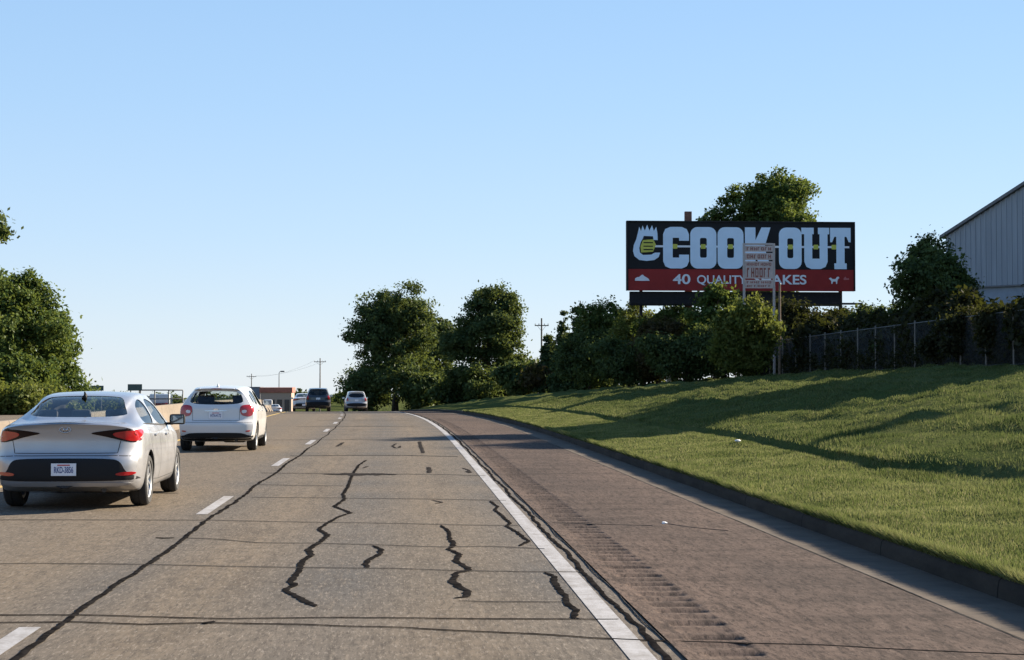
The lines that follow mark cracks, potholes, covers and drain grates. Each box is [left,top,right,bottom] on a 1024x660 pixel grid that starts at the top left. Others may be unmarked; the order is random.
crack [305,426,458,457]
